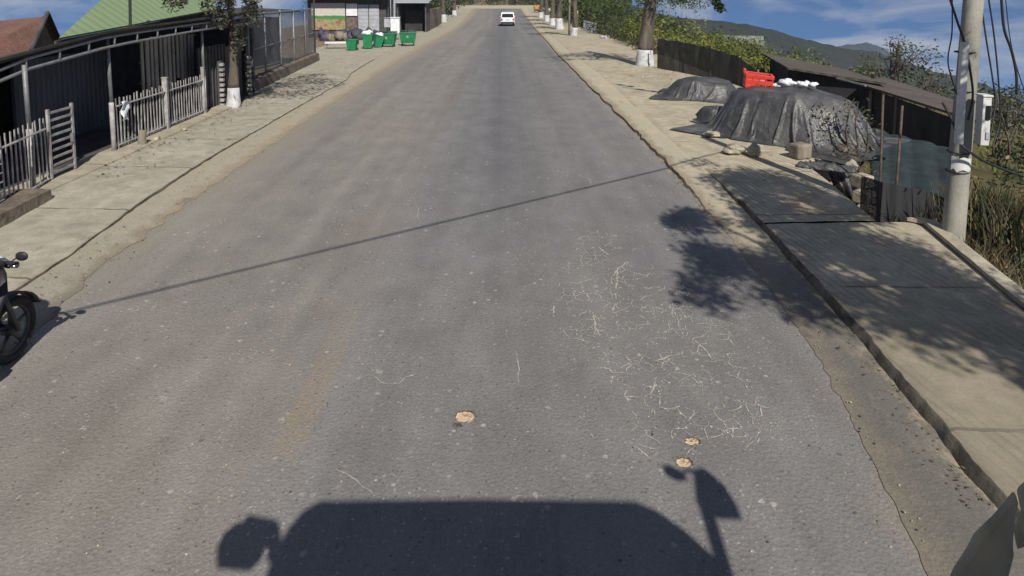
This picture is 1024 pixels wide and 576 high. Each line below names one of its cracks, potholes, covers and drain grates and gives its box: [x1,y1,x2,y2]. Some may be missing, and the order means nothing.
pothole [674,456,695,468]
pothole [682,435,702,447]
pothole [454,410,477,423]
